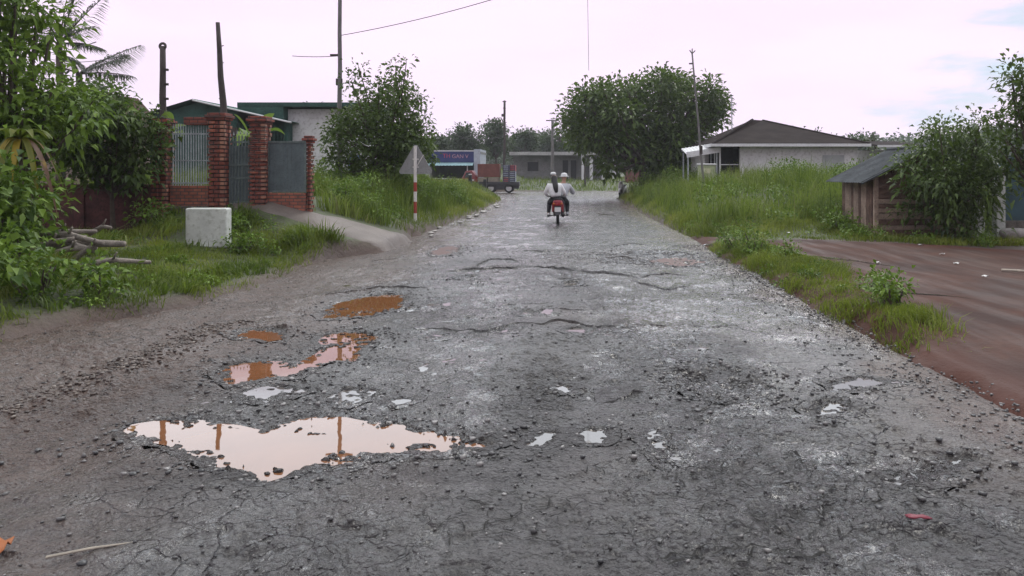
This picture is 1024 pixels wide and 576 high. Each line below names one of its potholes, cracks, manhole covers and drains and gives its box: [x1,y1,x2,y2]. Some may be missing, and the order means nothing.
pothole [111,410,512,487]
pothole [207,330,386,389]
pothole [312,291,414,321]
pothole [794,393,866,420]
pothole [514,425,570,451]
pothole [568,421,621,447]
crack [383,489,585,545]
crack [572,443,930,573]
crack [410,298,752,332]
crack [321,242,697,296]
pothole [222,323,297,343]
